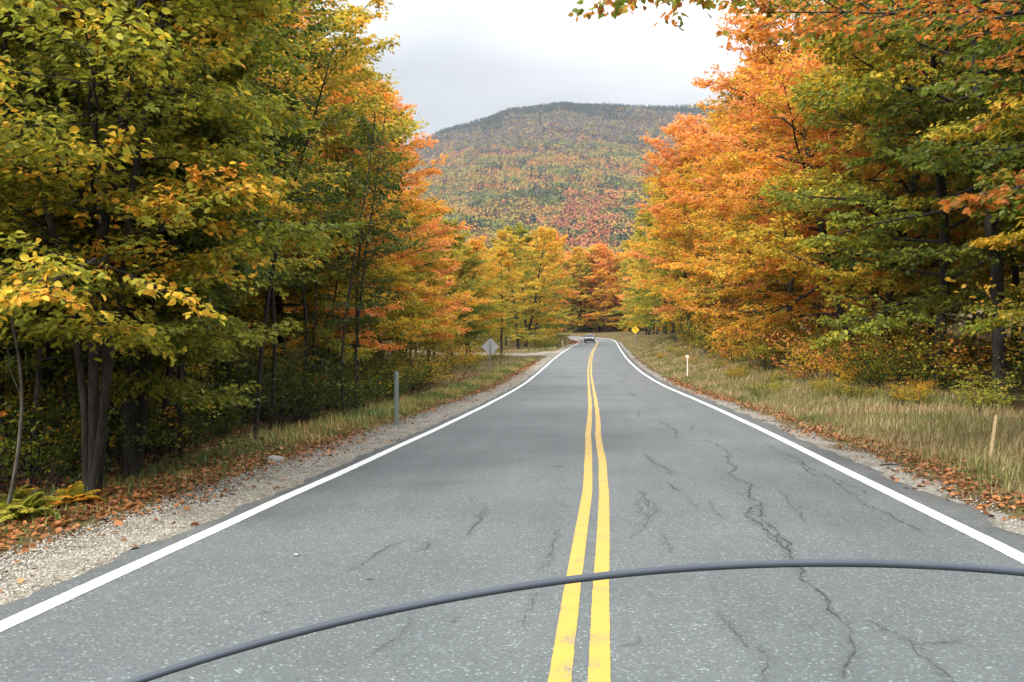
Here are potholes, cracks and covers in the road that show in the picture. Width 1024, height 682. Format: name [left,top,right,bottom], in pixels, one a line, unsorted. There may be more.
crack [767,443,920,530]
crack [654,419,855,680]
crack [871,620,961,682]
crack [630,455,723,549]
